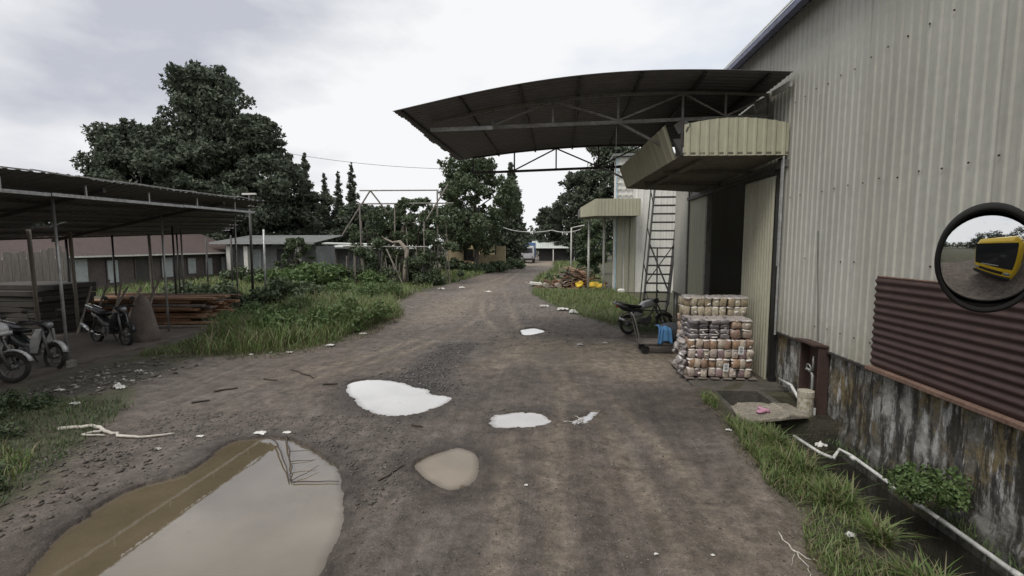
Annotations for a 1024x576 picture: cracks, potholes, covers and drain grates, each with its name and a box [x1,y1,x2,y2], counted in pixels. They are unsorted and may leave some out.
pothole [515,326,549,336]
pothole [340,377,458,418]
pothole [483,408,560,431]
pothole [405,446,488,495]
pothole [10,433,357,576]
